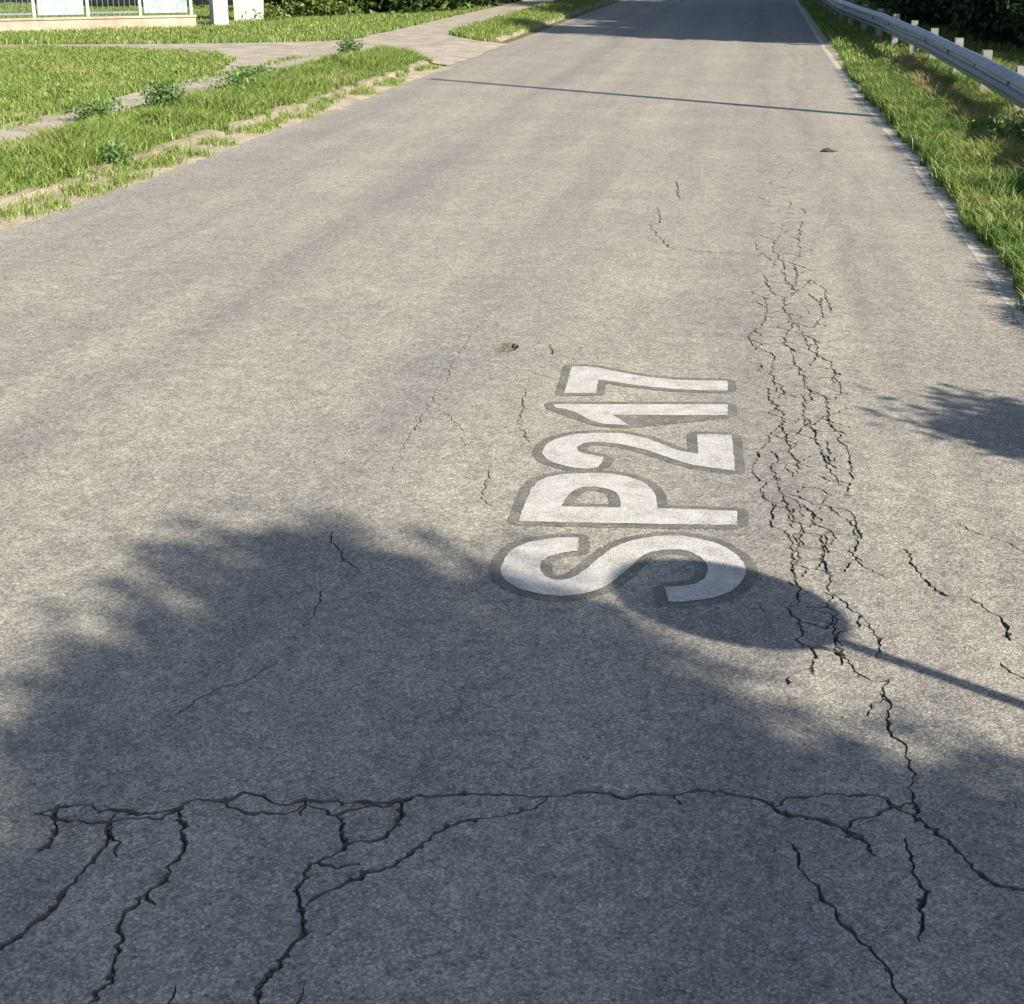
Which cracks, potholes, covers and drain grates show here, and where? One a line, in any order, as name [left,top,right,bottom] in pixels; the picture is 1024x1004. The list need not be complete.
crack [517,391,529,442]
crack [648,181,725,254]
crack [179,661,278,715]
crack [0,787,1024,1004]
crack [734,148,921,823]
crack [480,470,493,506]
crack [330,531,359,571]
crack [303,586,327,627]
crack [903,521,1024,641]
crack [392,305,501,471]
